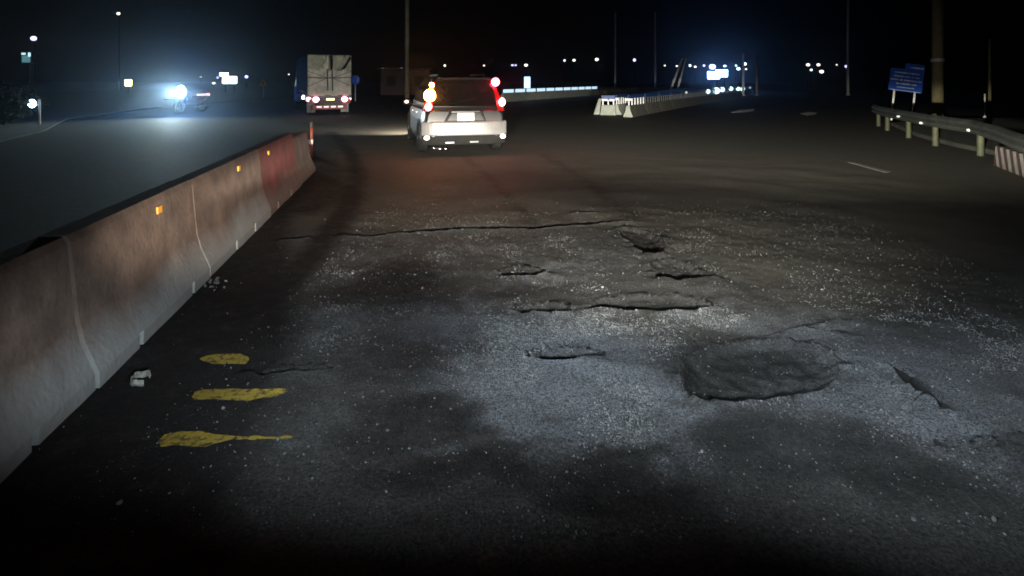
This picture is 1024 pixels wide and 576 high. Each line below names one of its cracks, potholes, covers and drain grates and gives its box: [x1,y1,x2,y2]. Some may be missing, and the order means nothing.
pothole [614,225,667,254]
crack [845,361,955,412]
pothole [524,344,608,360]
pothole [677,336,846,402]
pothole [497,265,546,276]
pothole [648,257,716,281]
crack [374,220,632,236]
